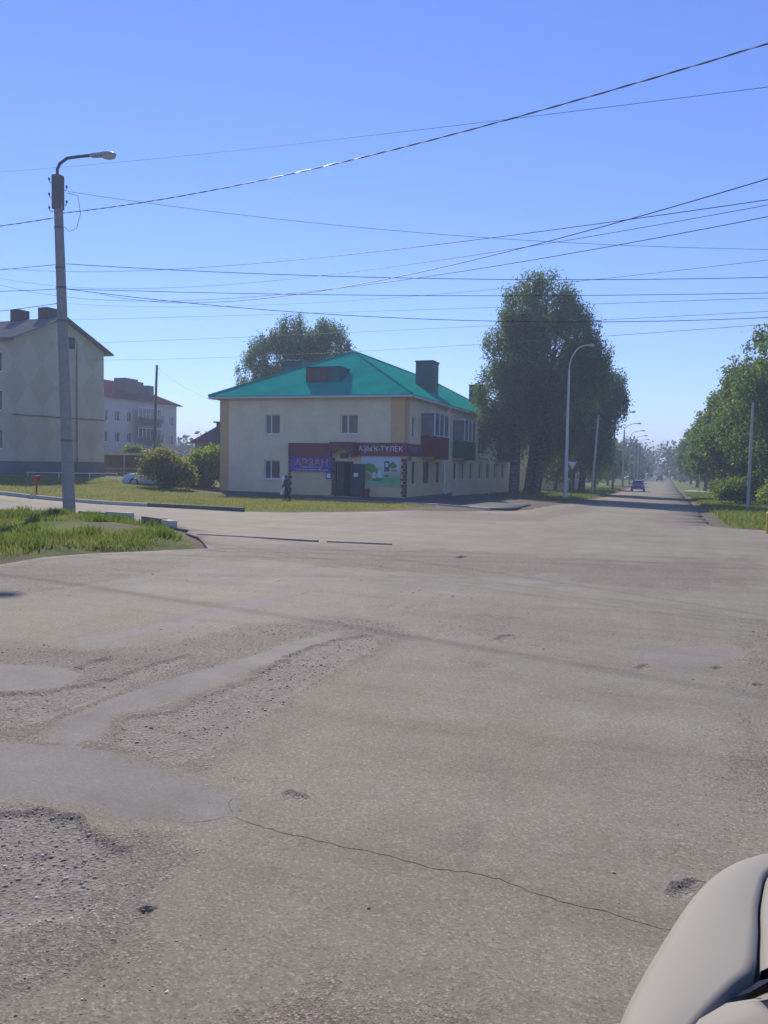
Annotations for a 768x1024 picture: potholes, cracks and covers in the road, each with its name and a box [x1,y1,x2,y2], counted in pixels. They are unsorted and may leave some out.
pothole [280,789,316,802]
pothole [493,634,516,644]
pothole [0,805,147,935]
pothole [135,905,158,914]
pothole [664,877,706,901]
pothole [109,633,386,765]
crack [186,802,671,930]
